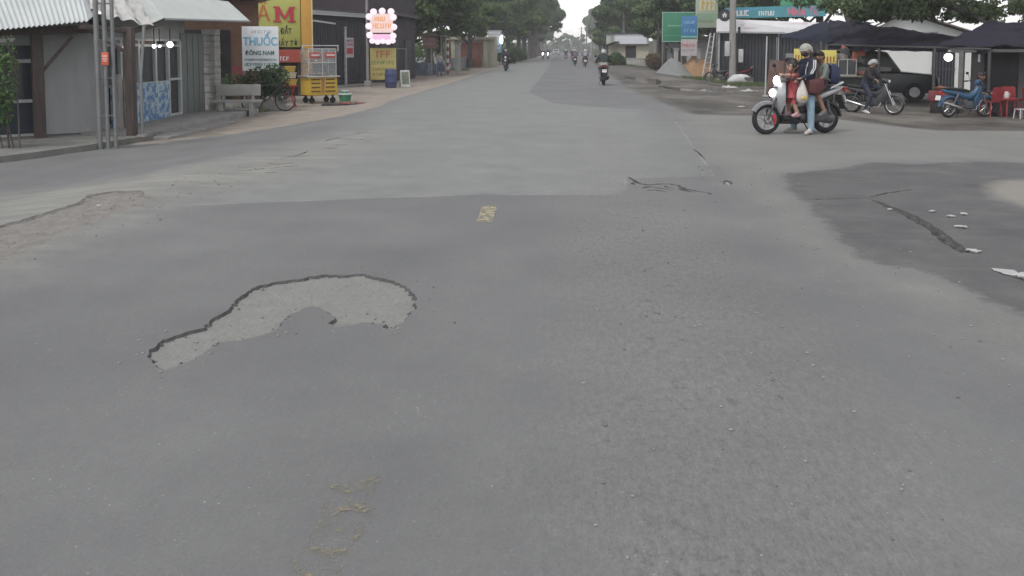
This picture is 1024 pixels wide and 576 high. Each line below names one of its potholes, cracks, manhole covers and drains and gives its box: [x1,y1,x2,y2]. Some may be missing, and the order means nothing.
pothole [147,274,417,370]
crack [813,190,970,253]
crack [628,177,712,195]
